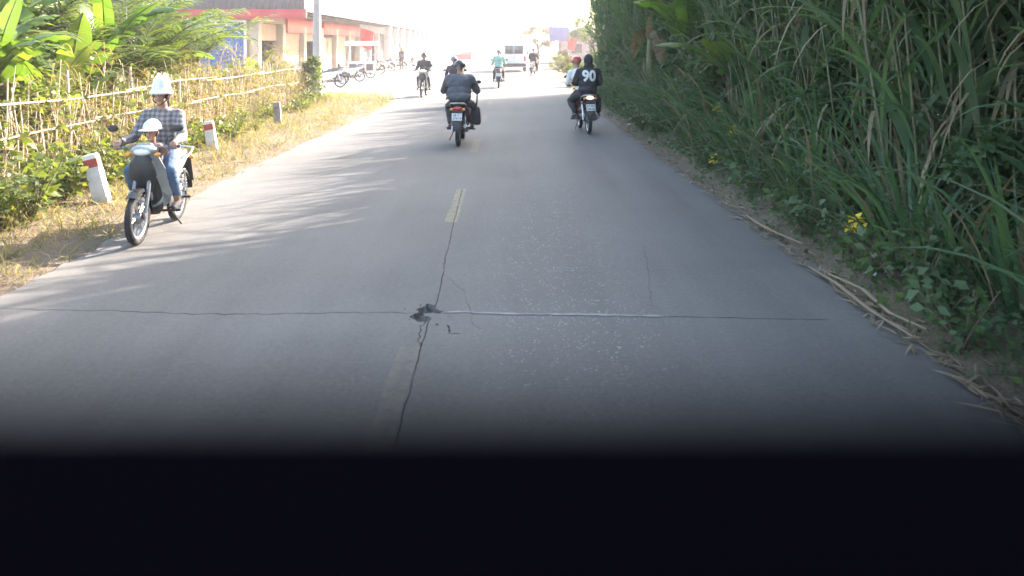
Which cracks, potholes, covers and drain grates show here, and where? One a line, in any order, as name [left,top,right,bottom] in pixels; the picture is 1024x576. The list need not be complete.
pothole [402,303,443,326]
crack [32,190,826,389]
